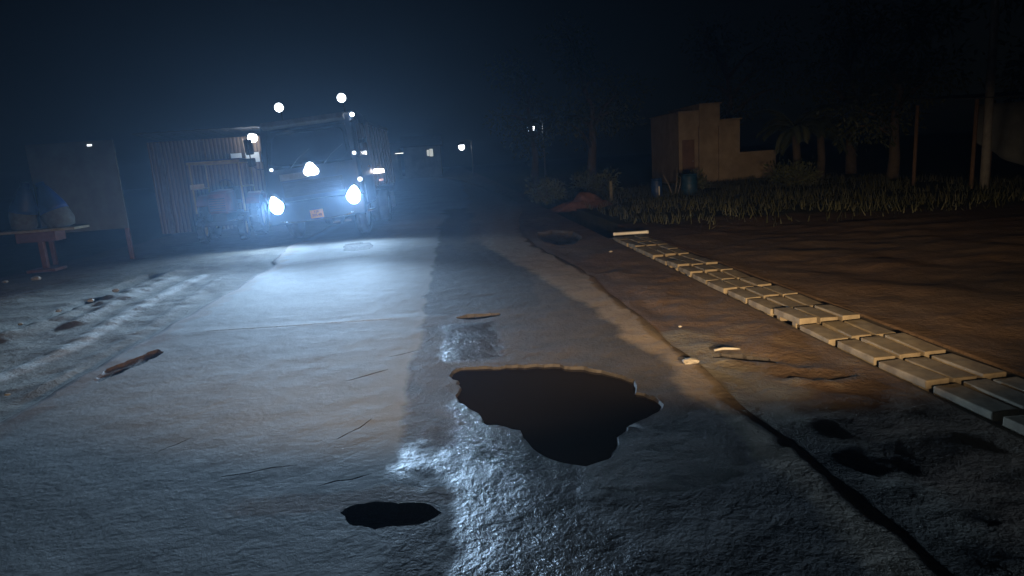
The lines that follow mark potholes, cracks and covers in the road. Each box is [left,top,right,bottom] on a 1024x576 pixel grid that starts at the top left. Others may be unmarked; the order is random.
pothole [93,349,163,382]
pothole [449,364,664,466]
pothole [340,502,442,529]
pothole [537,230,582,245]
